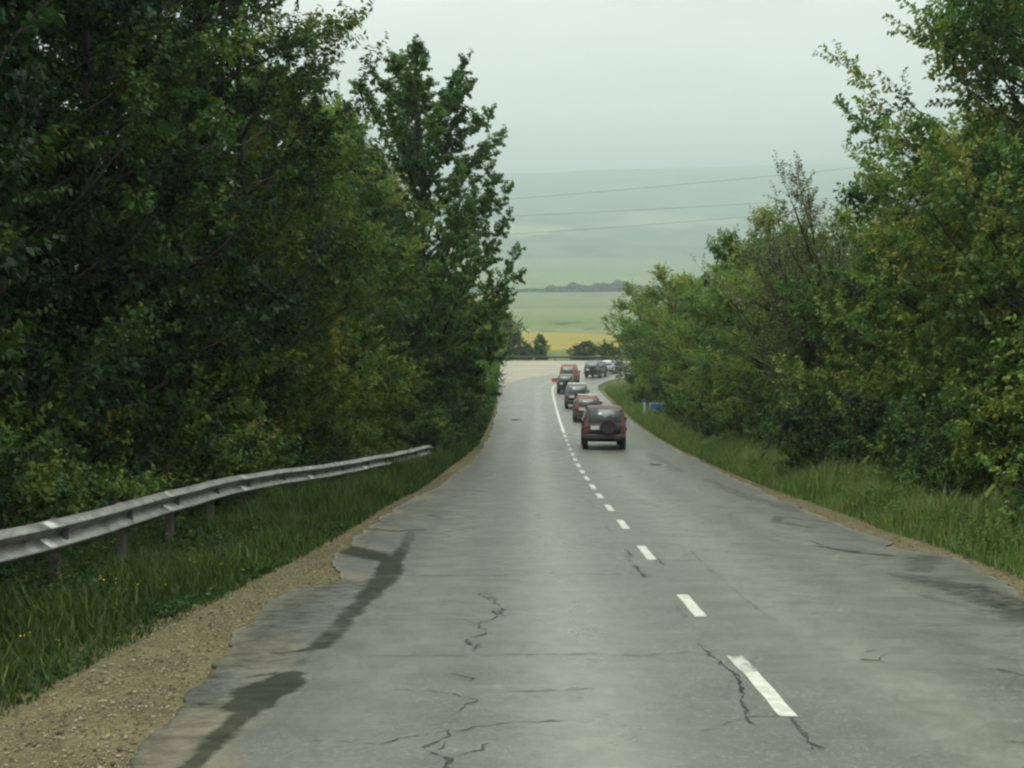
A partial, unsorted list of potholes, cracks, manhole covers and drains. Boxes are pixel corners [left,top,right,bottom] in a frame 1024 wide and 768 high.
crack [371,575,593,656]
crack [305,673,565,768]
crack [623,643,824,749]
crack [576,550,664,577]
